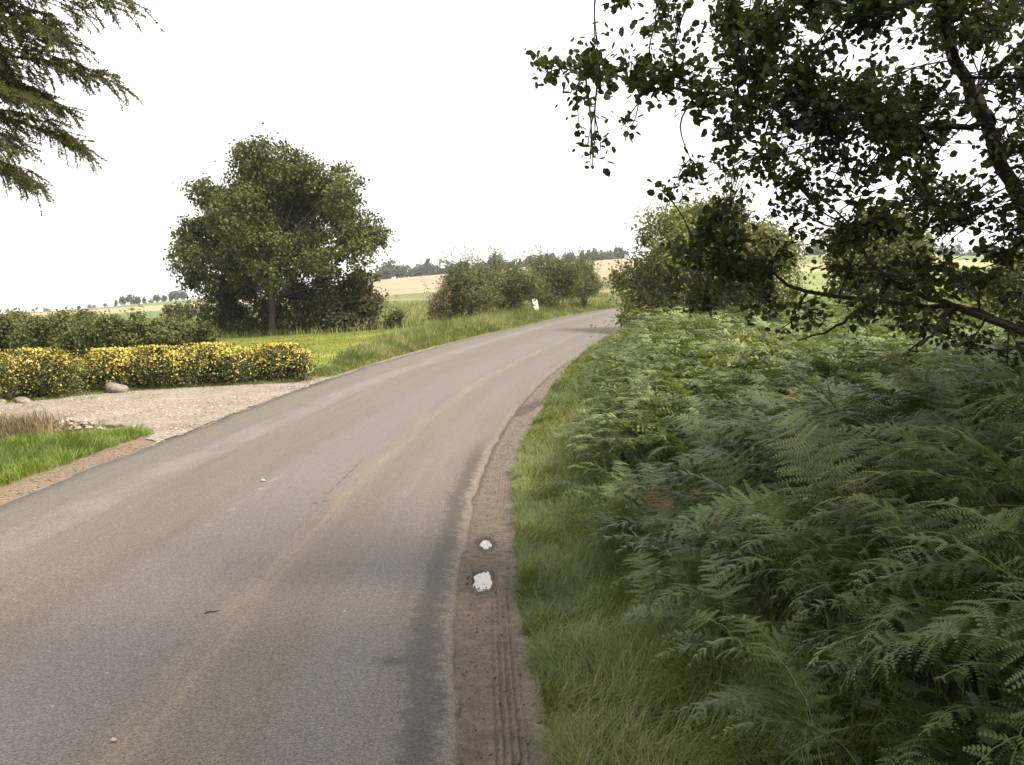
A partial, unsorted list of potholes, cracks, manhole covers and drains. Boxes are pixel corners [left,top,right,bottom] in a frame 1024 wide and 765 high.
pothole [478,536,492,549]
pothole [470,570,495,591]
